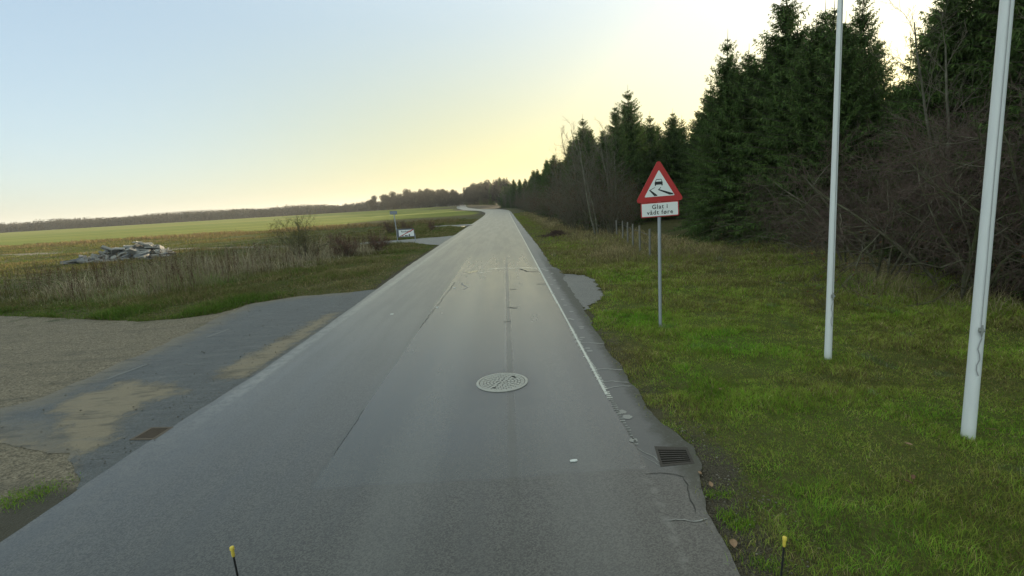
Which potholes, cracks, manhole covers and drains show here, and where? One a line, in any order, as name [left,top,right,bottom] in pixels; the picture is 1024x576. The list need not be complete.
manhole cover [476,373,528,392]
crack [638,448,707,522]
